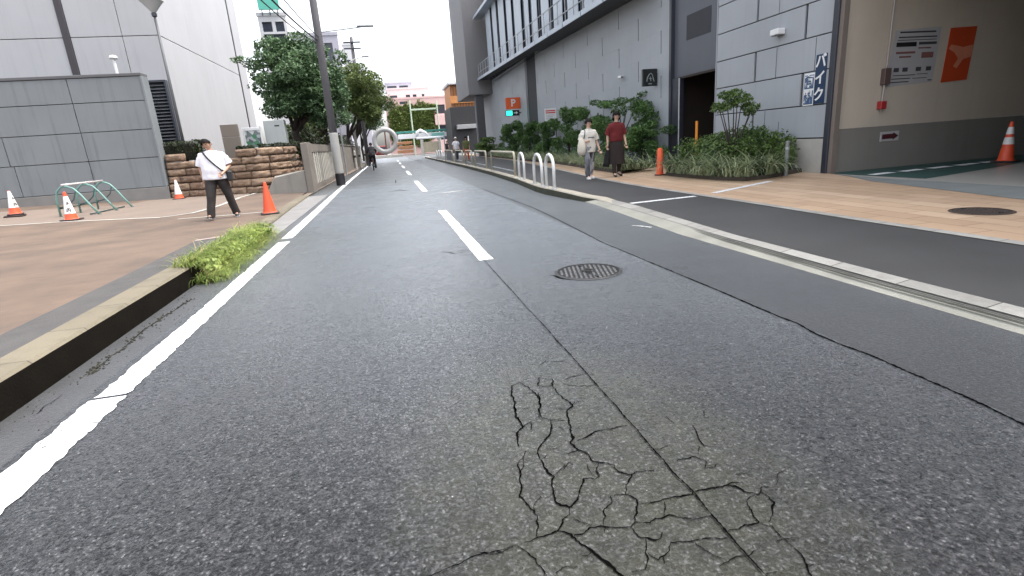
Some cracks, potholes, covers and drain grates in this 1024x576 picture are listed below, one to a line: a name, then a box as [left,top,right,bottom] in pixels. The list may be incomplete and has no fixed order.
crack [429,238,814,576]
manhole cover [948,207,1017,215]
manhole cover [555,263,622,280]
